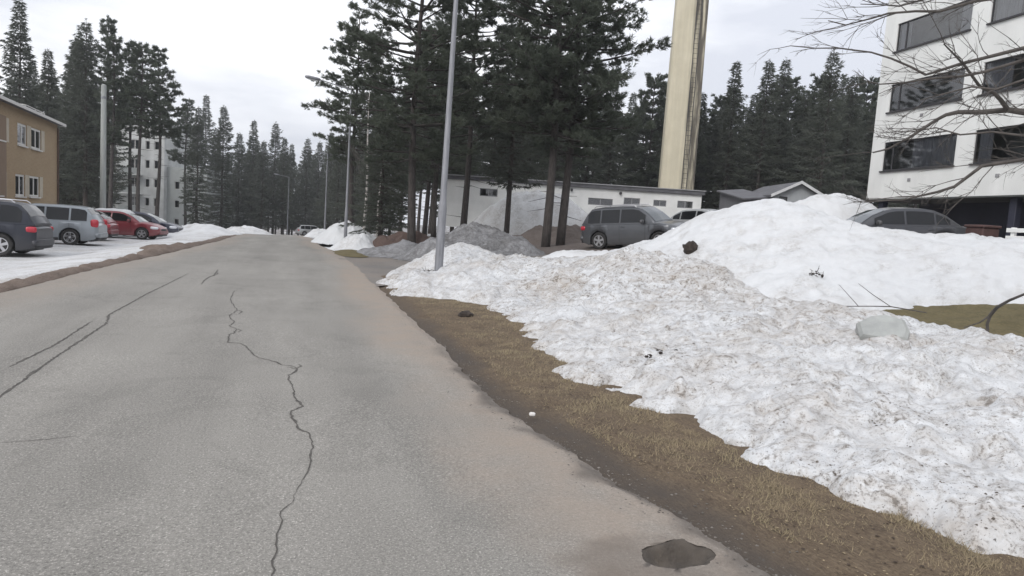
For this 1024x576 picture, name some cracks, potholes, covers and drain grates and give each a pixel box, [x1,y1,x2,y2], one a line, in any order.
crack [228,291,314,576]
pothole [642,539,716,569]
crack [0,270,218,397]
